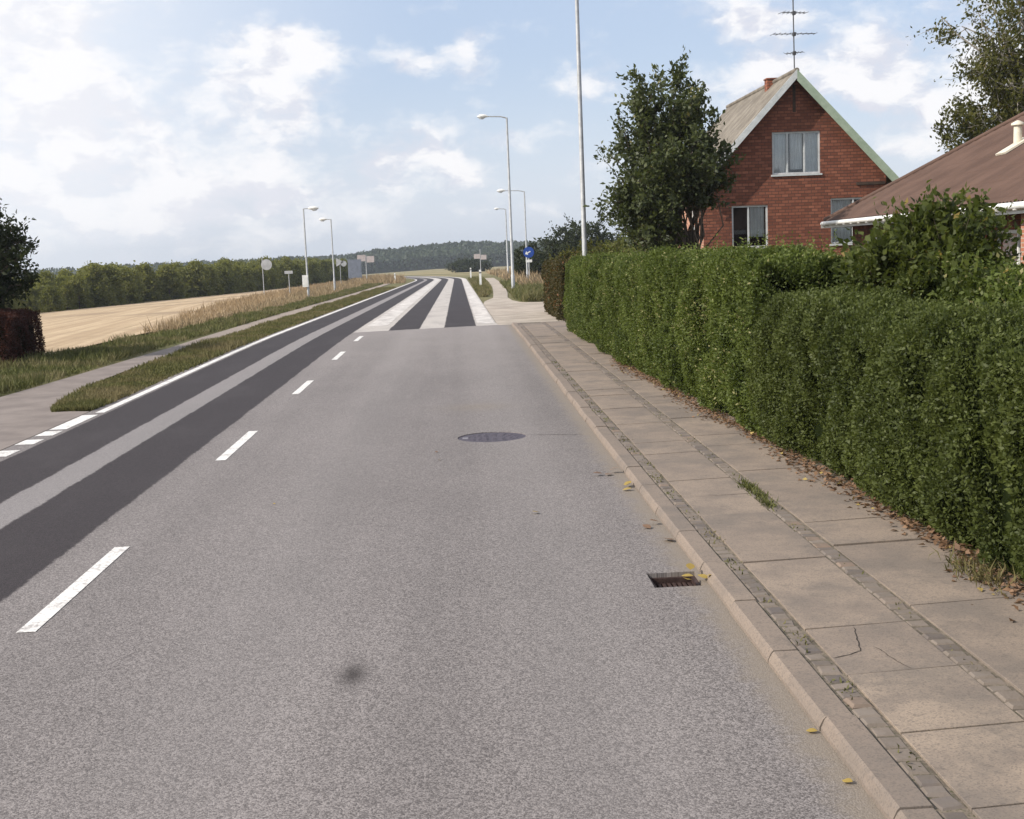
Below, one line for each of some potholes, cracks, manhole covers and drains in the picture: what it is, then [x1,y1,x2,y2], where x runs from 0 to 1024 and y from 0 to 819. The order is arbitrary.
drain grate [649,576,702,588]
manhole cover [458,432,526,442]
